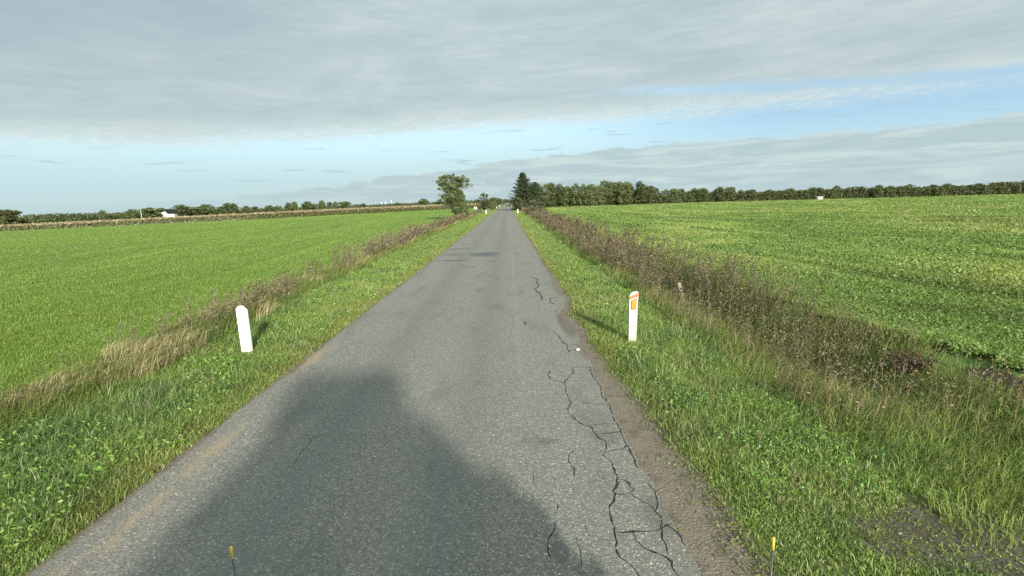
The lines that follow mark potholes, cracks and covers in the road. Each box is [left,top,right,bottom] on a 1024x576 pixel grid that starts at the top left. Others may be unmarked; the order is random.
crack [548,333,690,576]
